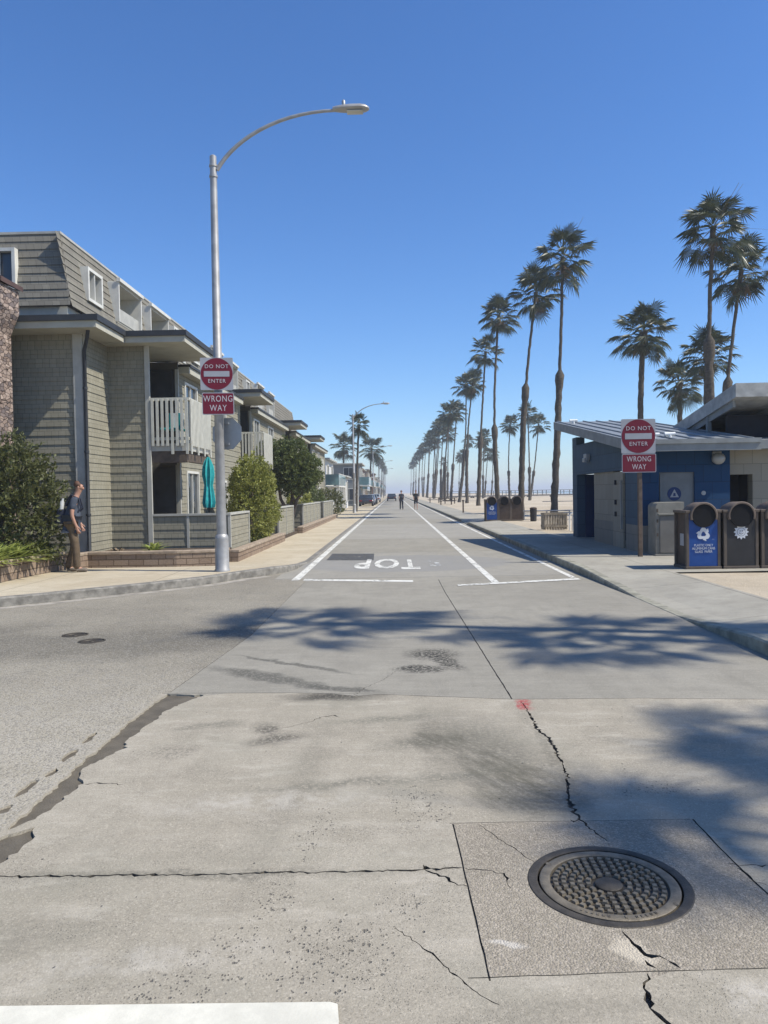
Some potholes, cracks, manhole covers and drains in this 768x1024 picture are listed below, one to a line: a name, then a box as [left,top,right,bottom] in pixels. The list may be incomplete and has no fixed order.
crack [622,931,680,1024]
crack [0,825,534,886]
pothole [14,780,39,798]
crack [397,929,499,1005]
manhole cover [527,846,695,929]
crack [521,702,607,841]
